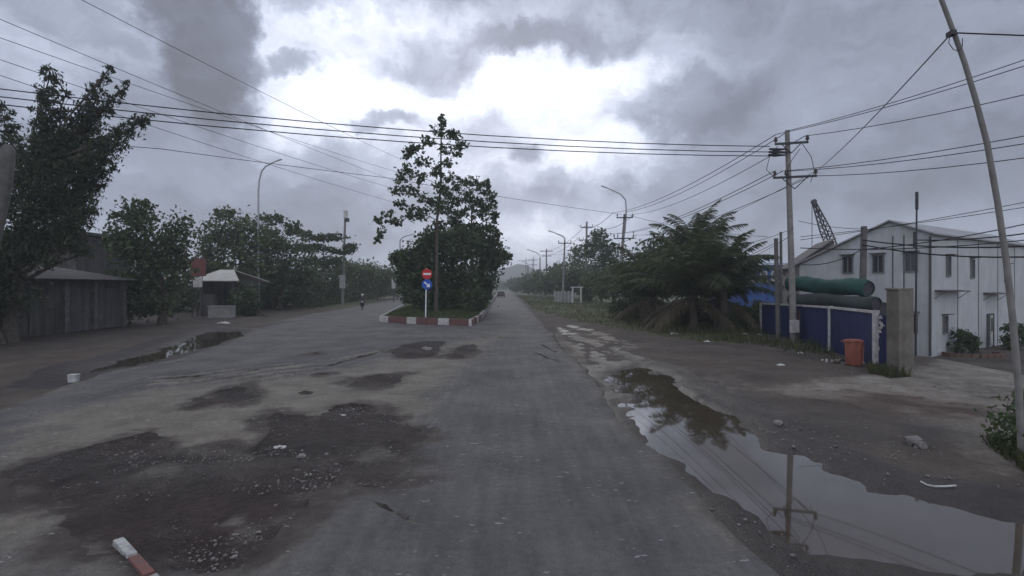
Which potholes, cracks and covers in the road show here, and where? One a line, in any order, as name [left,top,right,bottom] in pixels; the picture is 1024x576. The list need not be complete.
pothole [349,374,404,389]
pothole [446,344,477,359]
pothole [391,341,445,358]
crack [535,344,561,363]
pothole [181,386,261,409]
pothole [0,403,429,574]
crack [369,499,417,524]
